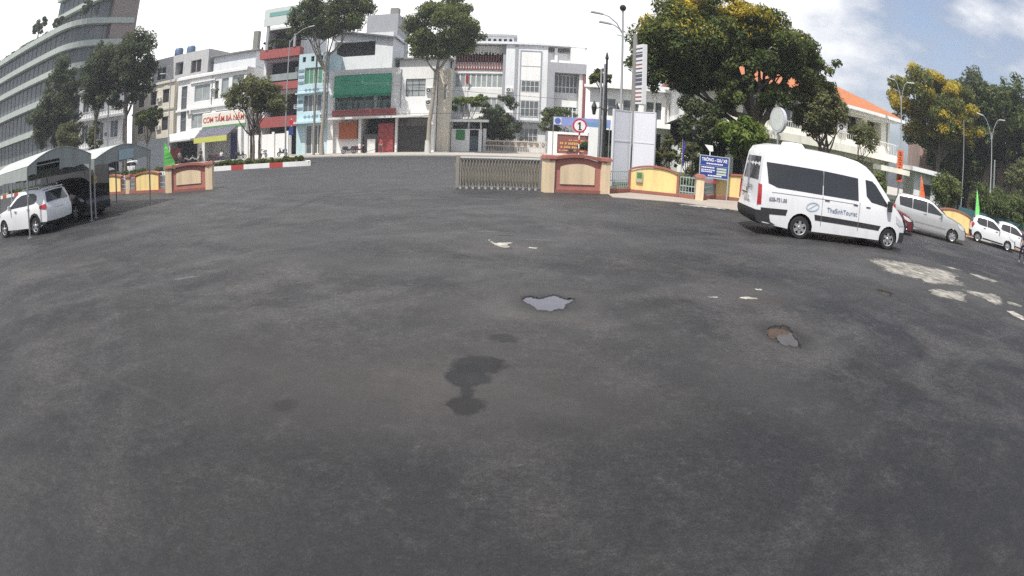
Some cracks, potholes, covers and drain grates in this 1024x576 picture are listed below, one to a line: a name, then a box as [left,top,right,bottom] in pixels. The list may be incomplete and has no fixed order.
pothole [763,324,803,349]
pothole [520,294,576,312]
